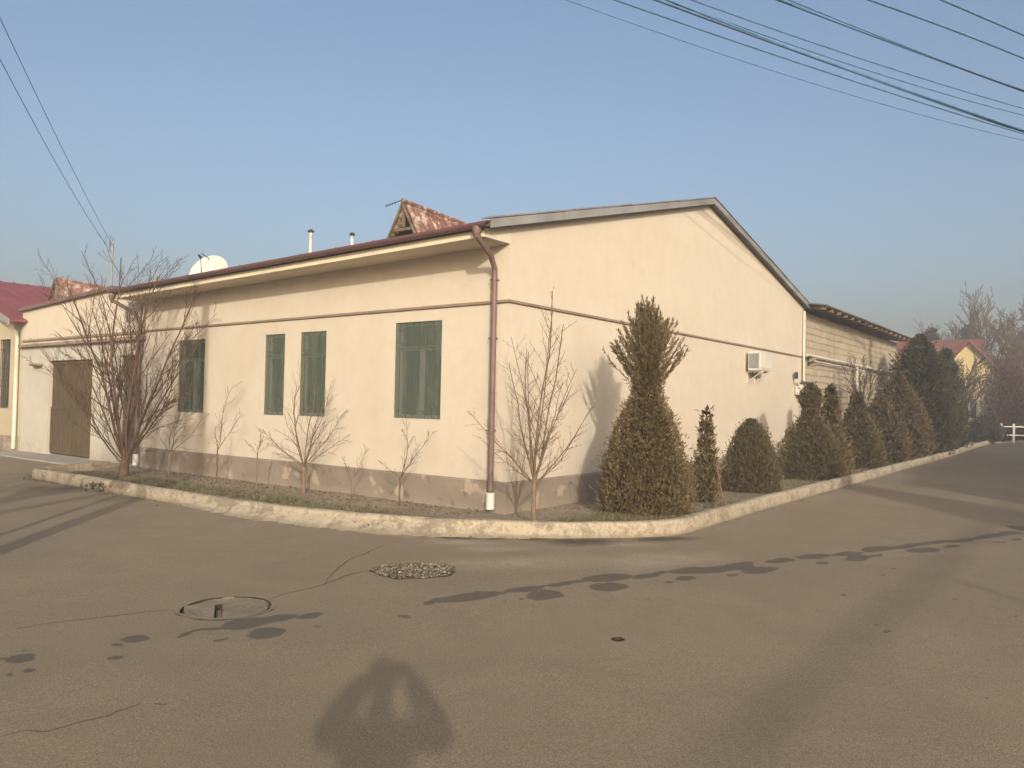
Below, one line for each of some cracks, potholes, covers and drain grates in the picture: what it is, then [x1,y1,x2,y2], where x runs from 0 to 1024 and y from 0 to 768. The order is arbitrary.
crack [273,546,381,598]
manhole cover [174,595,277,620]
pothole [370,561,455,580]
crack [1,703,166,737]
